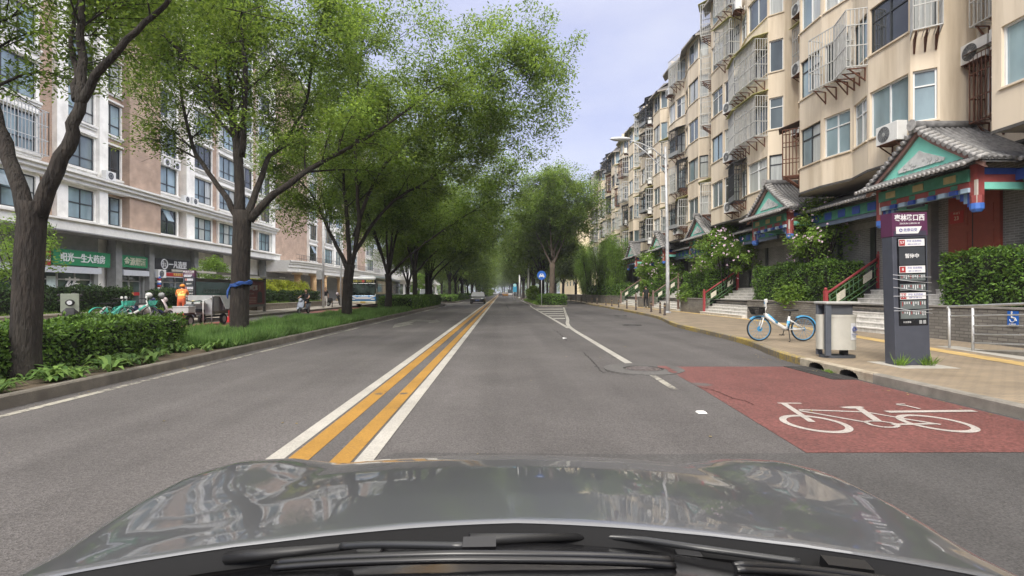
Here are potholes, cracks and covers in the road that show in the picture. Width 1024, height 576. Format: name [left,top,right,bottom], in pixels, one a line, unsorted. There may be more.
drain grate [807,372,859,380]
manhole cover [604,363,685,375]
